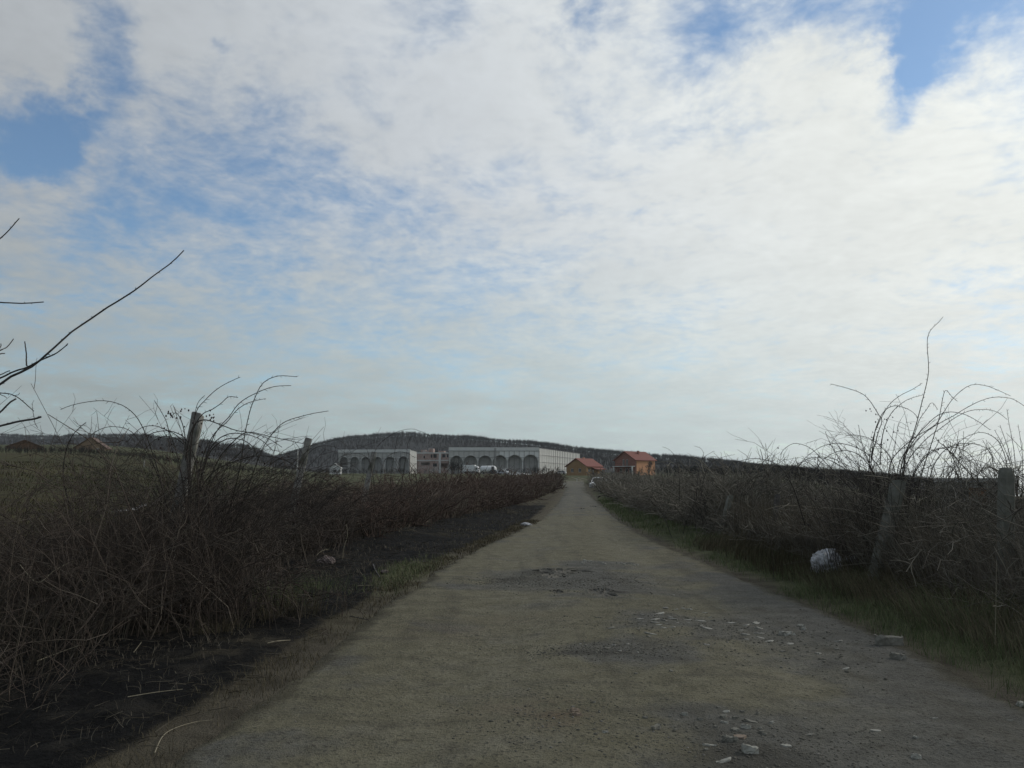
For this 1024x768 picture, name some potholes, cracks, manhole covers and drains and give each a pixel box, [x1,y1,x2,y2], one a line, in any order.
pothole [531,568,594,578]
pothole [587,588,626,598]
